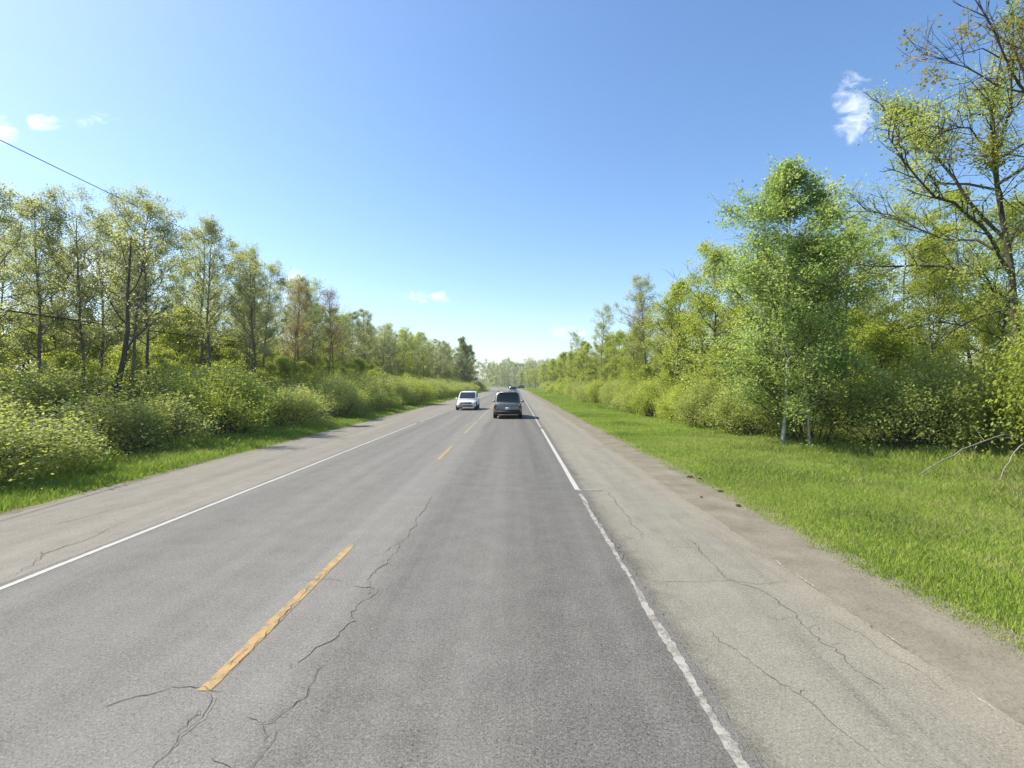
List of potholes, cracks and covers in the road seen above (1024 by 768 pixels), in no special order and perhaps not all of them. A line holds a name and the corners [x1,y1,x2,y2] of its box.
crack [244,500,429,768]
crack [710,630,885,766]
crack [104,686,231,768]
crack [662,538,881,685]
